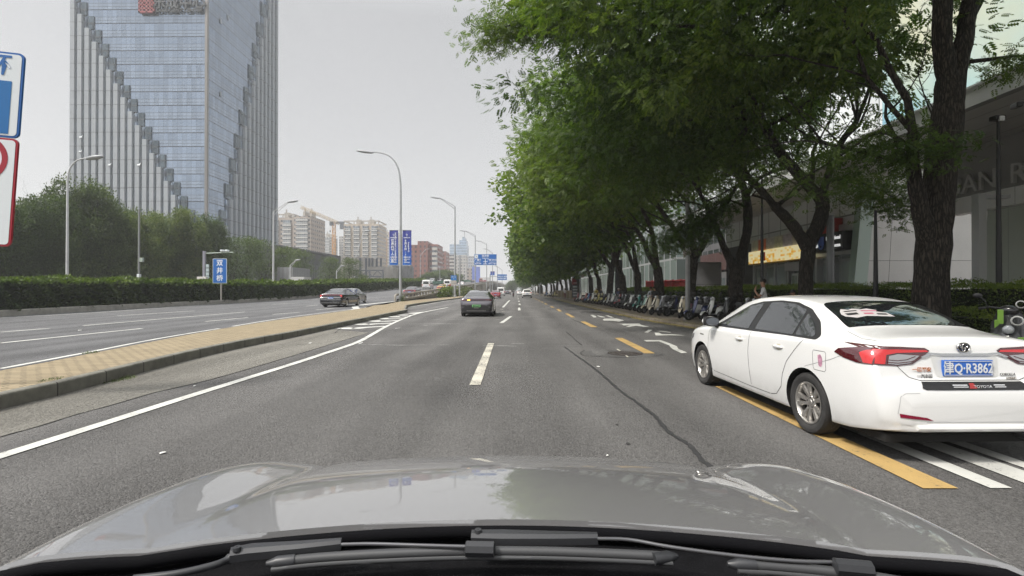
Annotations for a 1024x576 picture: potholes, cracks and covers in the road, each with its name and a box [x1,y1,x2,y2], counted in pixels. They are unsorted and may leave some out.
manhole cover [579,350,665,358]
